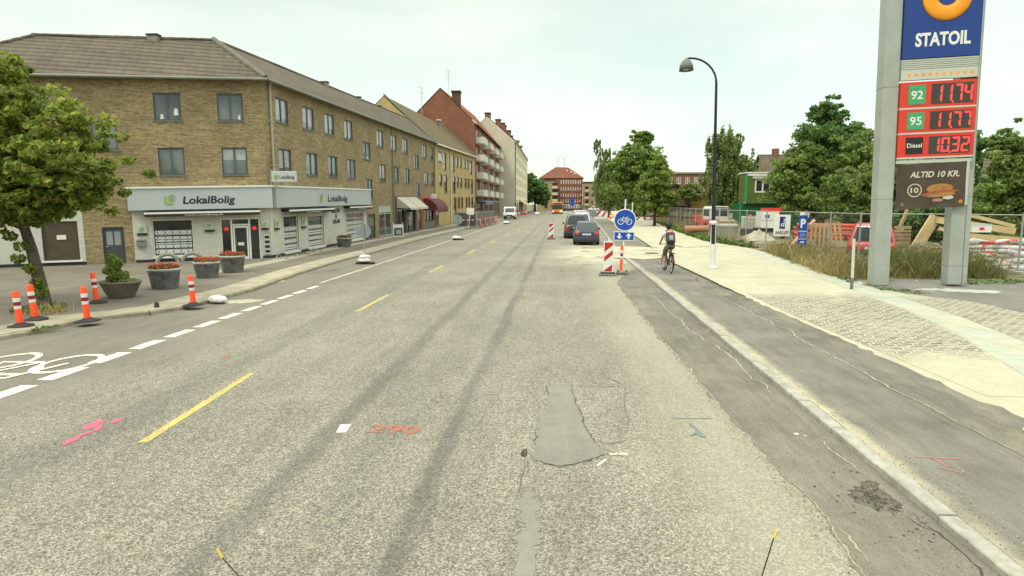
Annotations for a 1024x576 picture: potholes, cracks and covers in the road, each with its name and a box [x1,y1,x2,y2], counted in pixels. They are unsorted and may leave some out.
crack [516,461,530,499]
crack [908,510,983,576]
crack [597,375,630,443]
crack [812,437,867,476]
crack [838,528,869,562]
crack [650,293,797,415]
